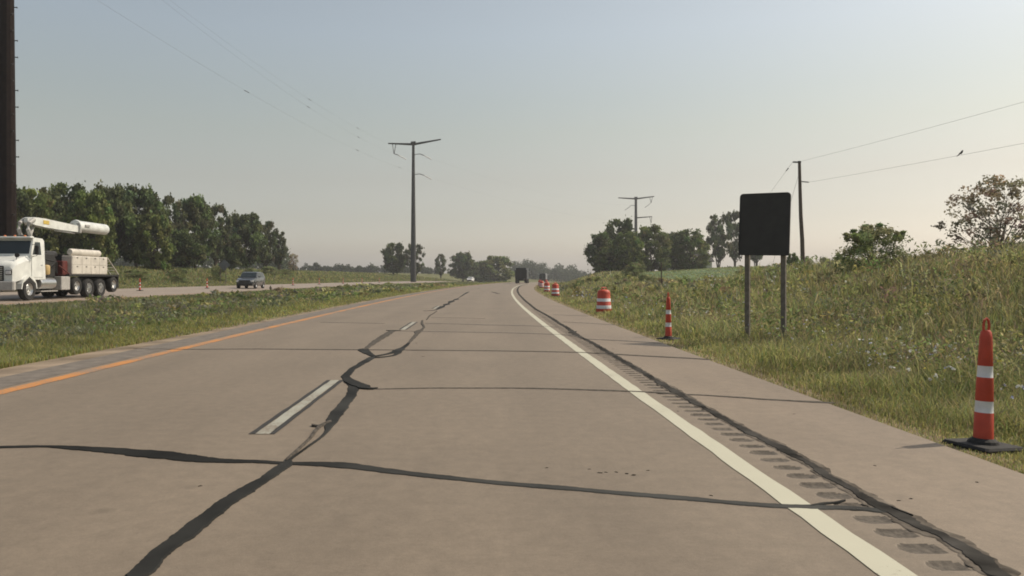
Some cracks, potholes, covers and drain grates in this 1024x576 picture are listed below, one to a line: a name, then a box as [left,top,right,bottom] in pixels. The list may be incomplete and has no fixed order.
crack [133,284,1021,576]
